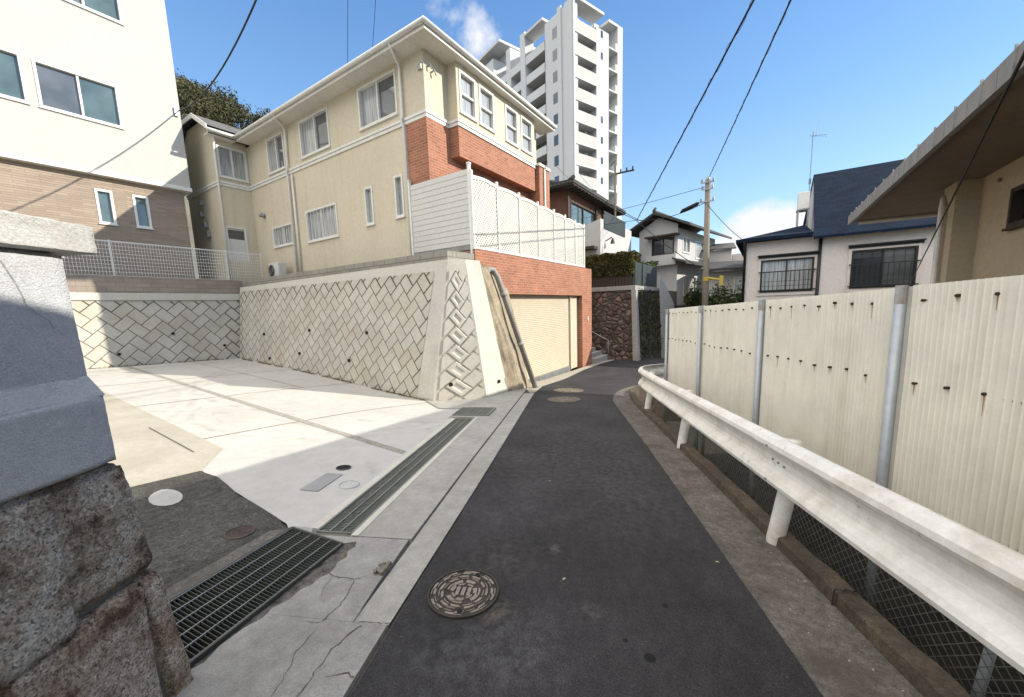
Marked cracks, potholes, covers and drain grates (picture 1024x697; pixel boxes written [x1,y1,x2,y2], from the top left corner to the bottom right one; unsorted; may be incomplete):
utility cover [300,473,342,491]
crack [273,572,364,697]
manhole cover [224,525,256,540]
drain grate [452,407,496,416]
manhole cover [427,569,499,620]
drain grate [316,418,474,536]
manhole cover [338,481,360,489]
